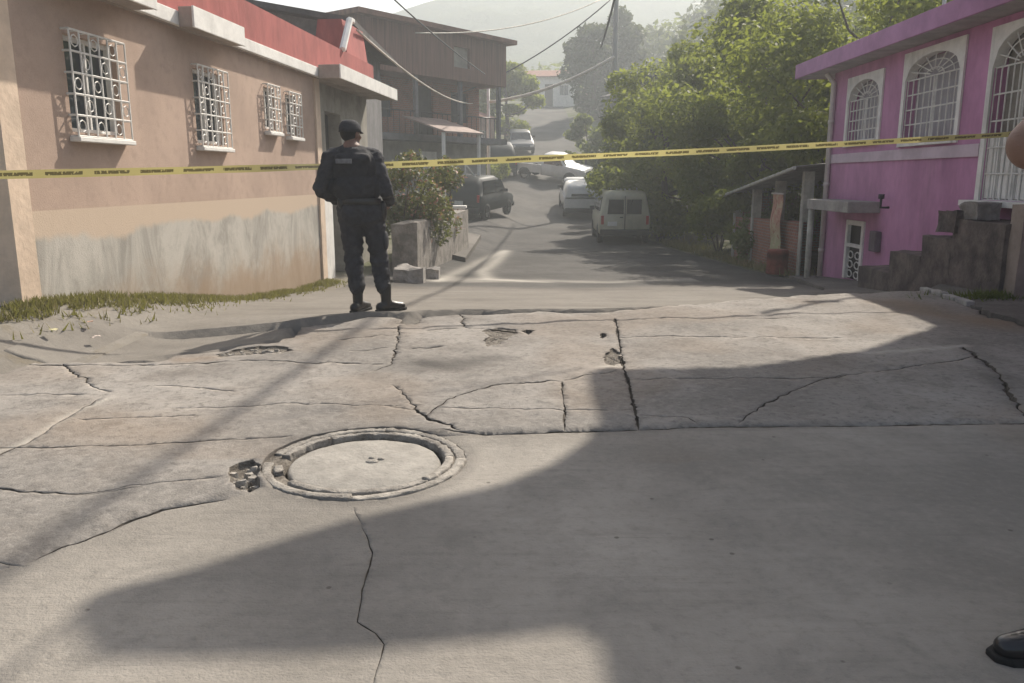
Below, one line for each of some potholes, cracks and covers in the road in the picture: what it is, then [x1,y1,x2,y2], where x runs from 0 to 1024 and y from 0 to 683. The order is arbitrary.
crack [355,513,385,683]
crack [962,347,1024,416]
pothole [228,460,261,492]
manhole cover [261,428,466,501]
pothole [217,346,293,357]
crack [1,477,218,559]
crack [743,375,841,421]
crack [0,364,110,455]
crack [344,316,553,429]
pothole [482,328,518,346]
pothole [602,348,623,366]
